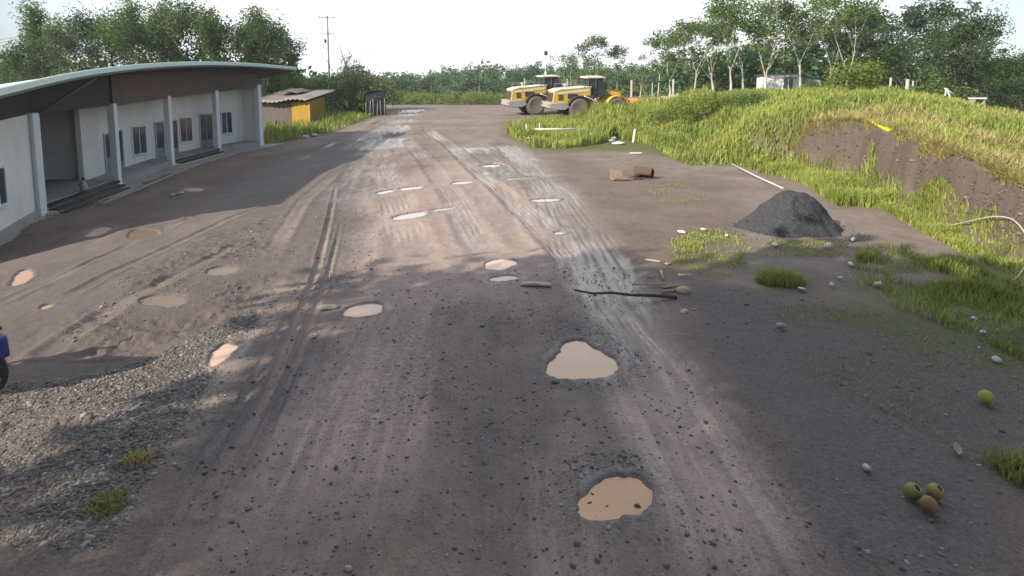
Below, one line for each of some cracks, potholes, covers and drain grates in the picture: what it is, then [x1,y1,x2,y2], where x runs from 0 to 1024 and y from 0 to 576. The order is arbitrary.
pothole [563,466,669,530]
pothole [198,338,247,370]
pothole [479,256,523,271]
pothole [387,210,432,221]
pothole [534,335,629,384]
pothole [120,228,165,241]
pothole [335,299,390,319]
pothole [484,273,525,283]
pothole [79,225,118,238]
pothole [1,267,42,288]
pothole [200,264,244,277]
pothole [131,291,193,310]
